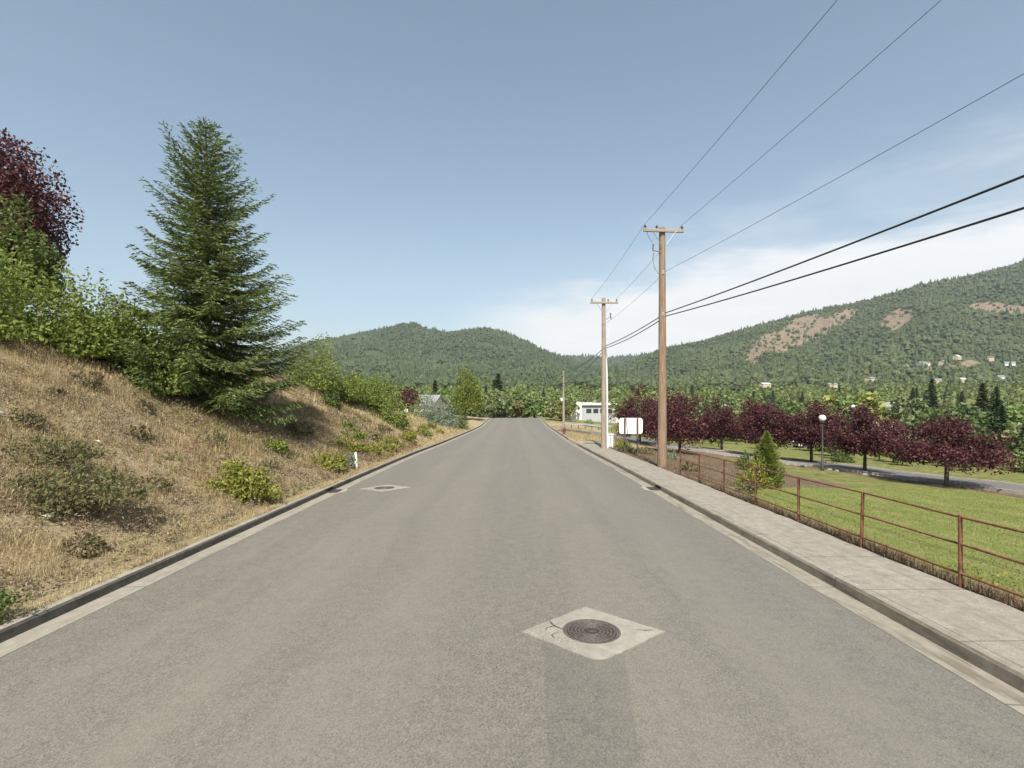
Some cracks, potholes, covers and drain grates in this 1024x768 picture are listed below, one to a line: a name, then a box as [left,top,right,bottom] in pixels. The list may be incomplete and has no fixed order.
manhole cover [522,607,665,660]
